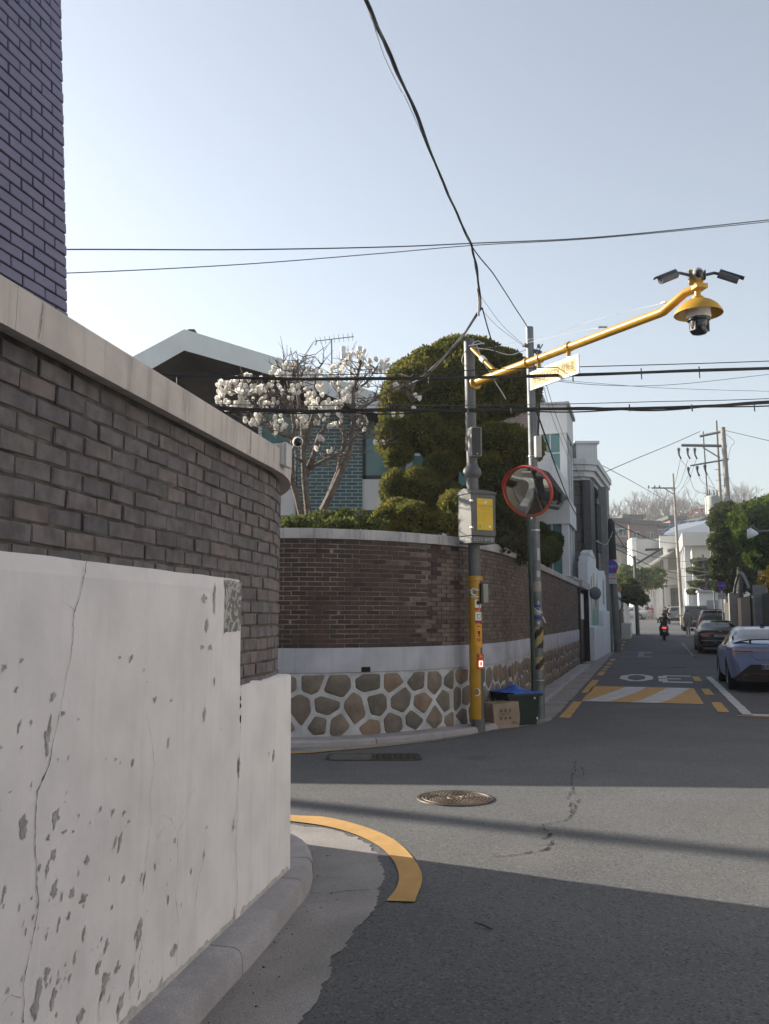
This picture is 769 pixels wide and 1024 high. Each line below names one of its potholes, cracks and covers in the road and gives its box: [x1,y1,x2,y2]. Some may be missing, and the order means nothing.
crack [497,762,584,857]
manhole cover [417,790,494,806]
